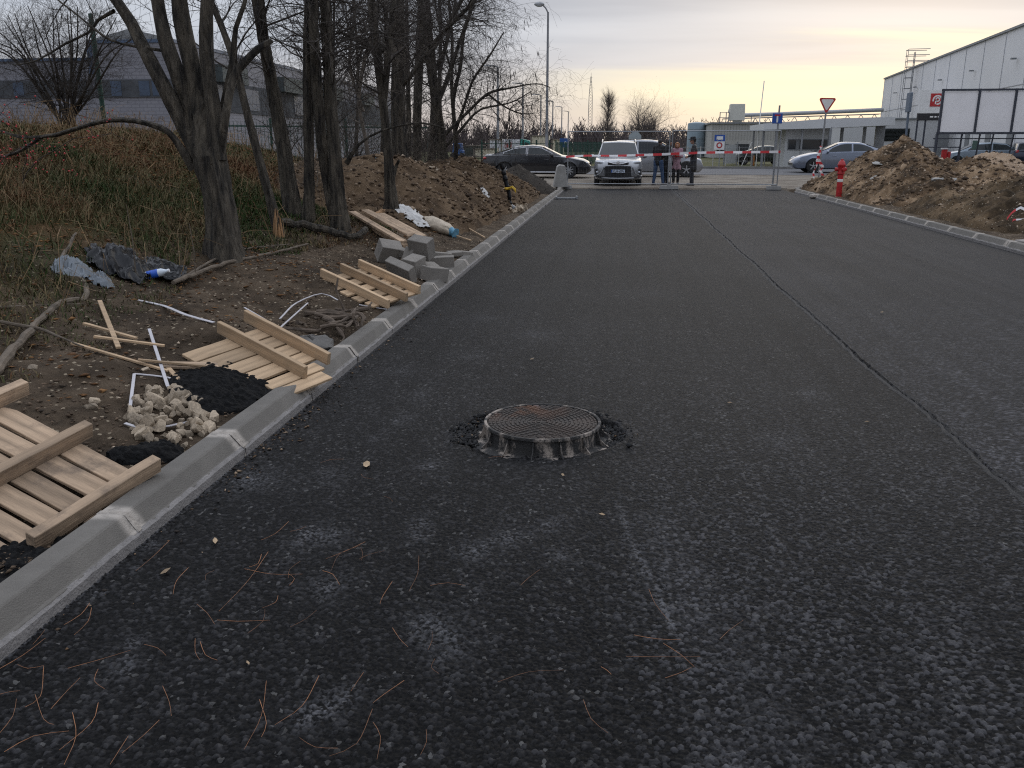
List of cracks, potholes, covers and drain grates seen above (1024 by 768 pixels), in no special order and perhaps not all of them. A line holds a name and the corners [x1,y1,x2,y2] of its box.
manhole cover [472,403,613,460]
